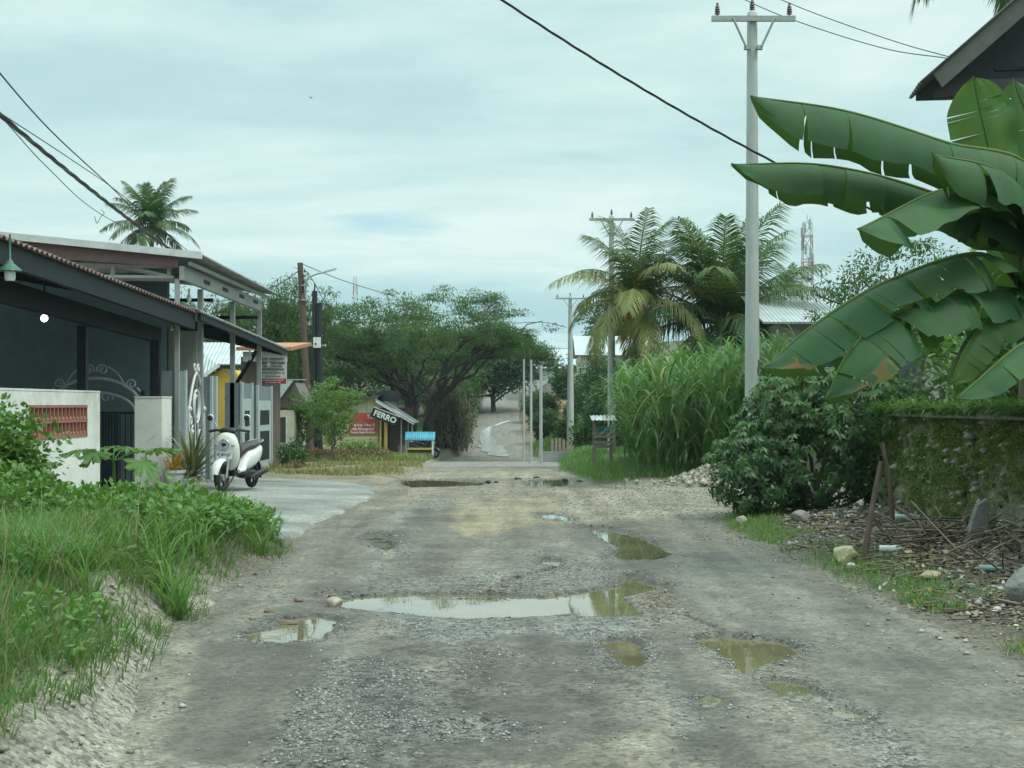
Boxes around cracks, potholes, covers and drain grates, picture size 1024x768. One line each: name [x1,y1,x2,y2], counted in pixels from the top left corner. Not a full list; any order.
pothole [235,613,343,642]
pothole [357,530,399,551]
pothole [534,512,578,521]
pothole [689,632,809,677]
pothole [594,633,655,667]
pothole [521,478,576,488]
pothole [756,676,834,702]
pothole [579,524,675,560]
pothole [398,478,493,487]
pothole [323,571,683,619]
